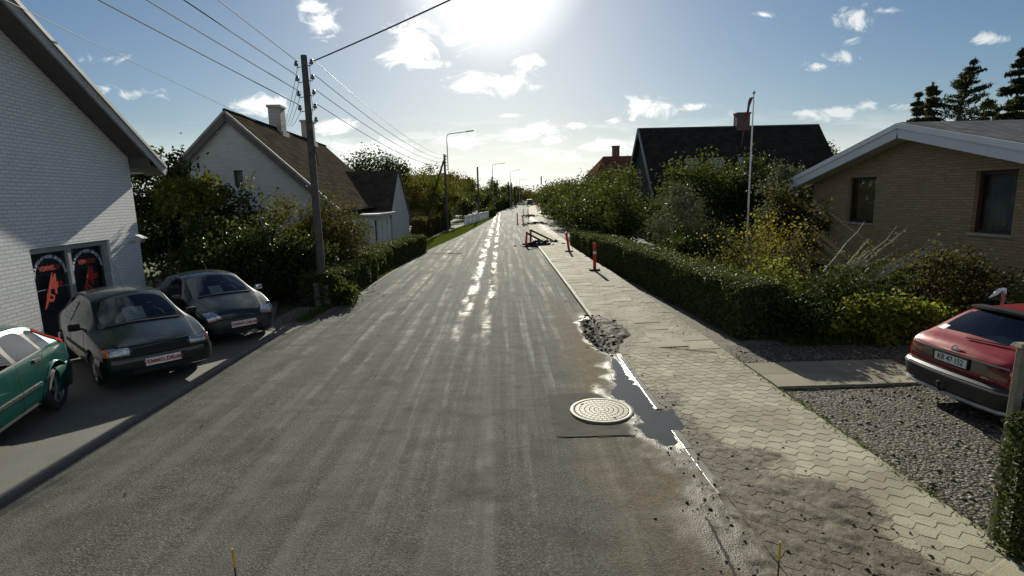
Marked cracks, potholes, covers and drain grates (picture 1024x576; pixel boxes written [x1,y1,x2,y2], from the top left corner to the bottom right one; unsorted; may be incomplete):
pothole [577,315,631,354]
manhole cover [570,398,634,424]
